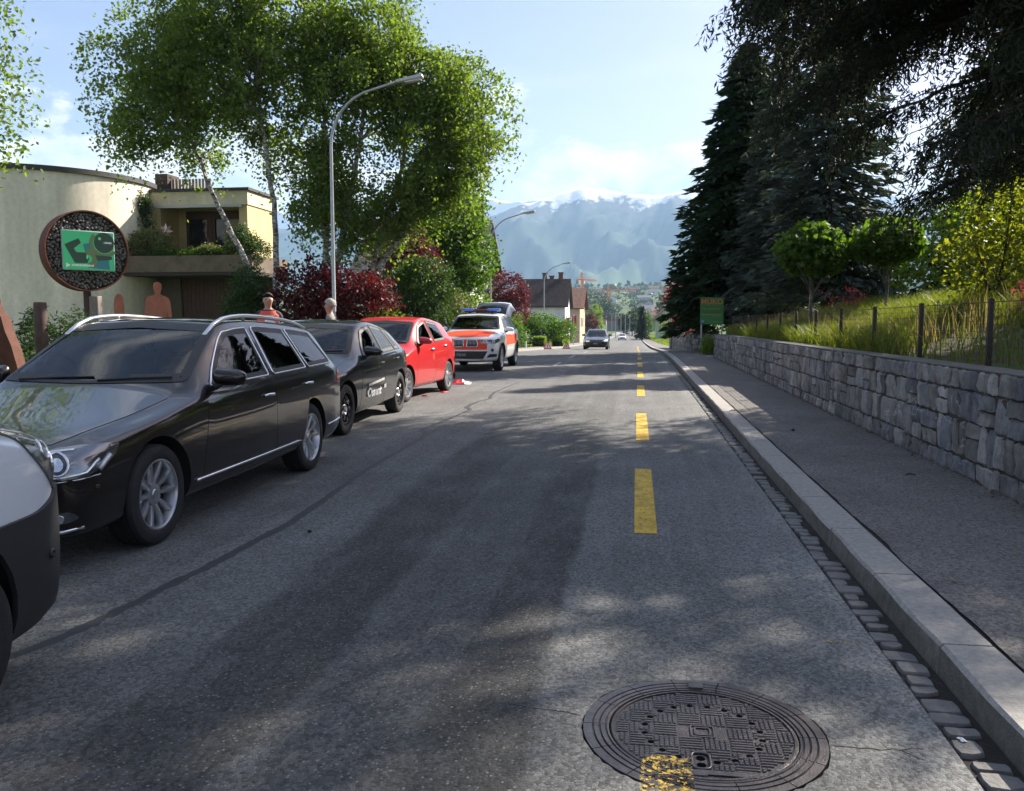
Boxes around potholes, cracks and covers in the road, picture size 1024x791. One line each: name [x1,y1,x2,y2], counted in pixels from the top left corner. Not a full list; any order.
manhole cover [583,680,830,791]
crack [834,745,924,760]
